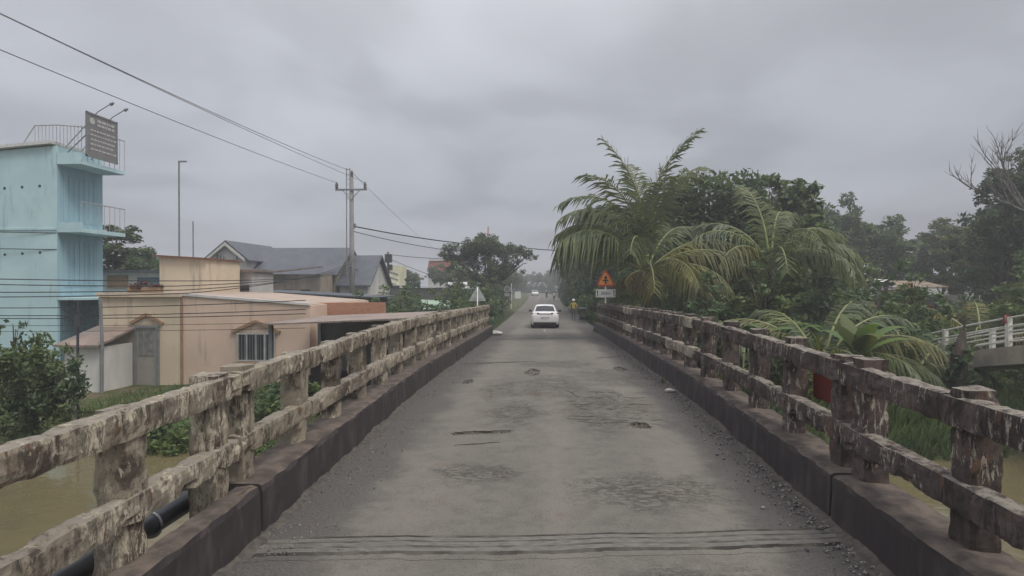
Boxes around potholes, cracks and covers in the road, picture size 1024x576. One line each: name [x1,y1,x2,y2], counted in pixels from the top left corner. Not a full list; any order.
pothole [519,368,543,377]
pothole [444,429,521,437]
pothole [623,420,658,431]
